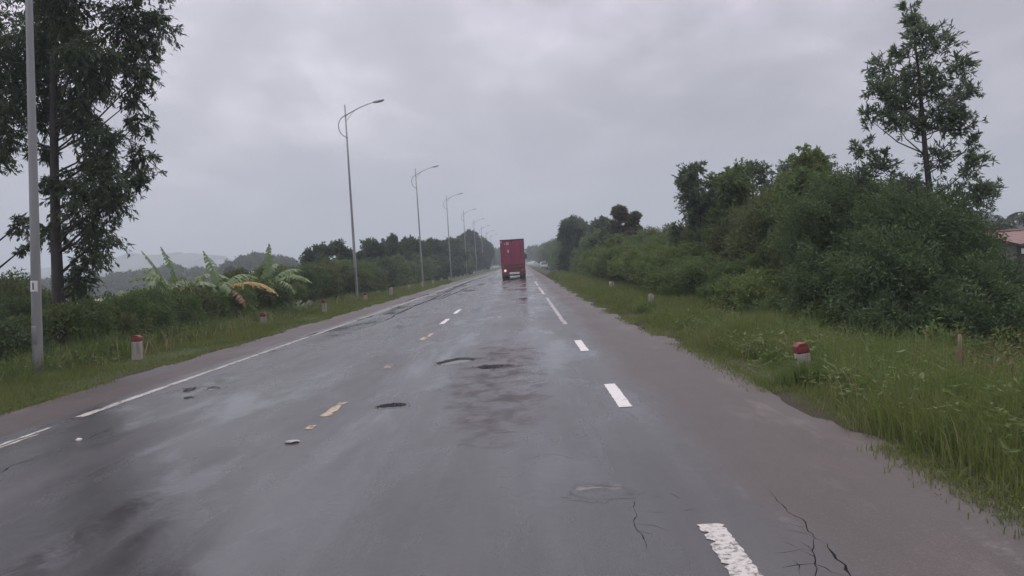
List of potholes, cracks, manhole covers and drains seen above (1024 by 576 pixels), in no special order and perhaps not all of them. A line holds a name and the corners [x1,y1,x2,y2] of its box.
pothole [433,357,482,366]
crack [623,494,693,550]
crack [774,496,851,576]
